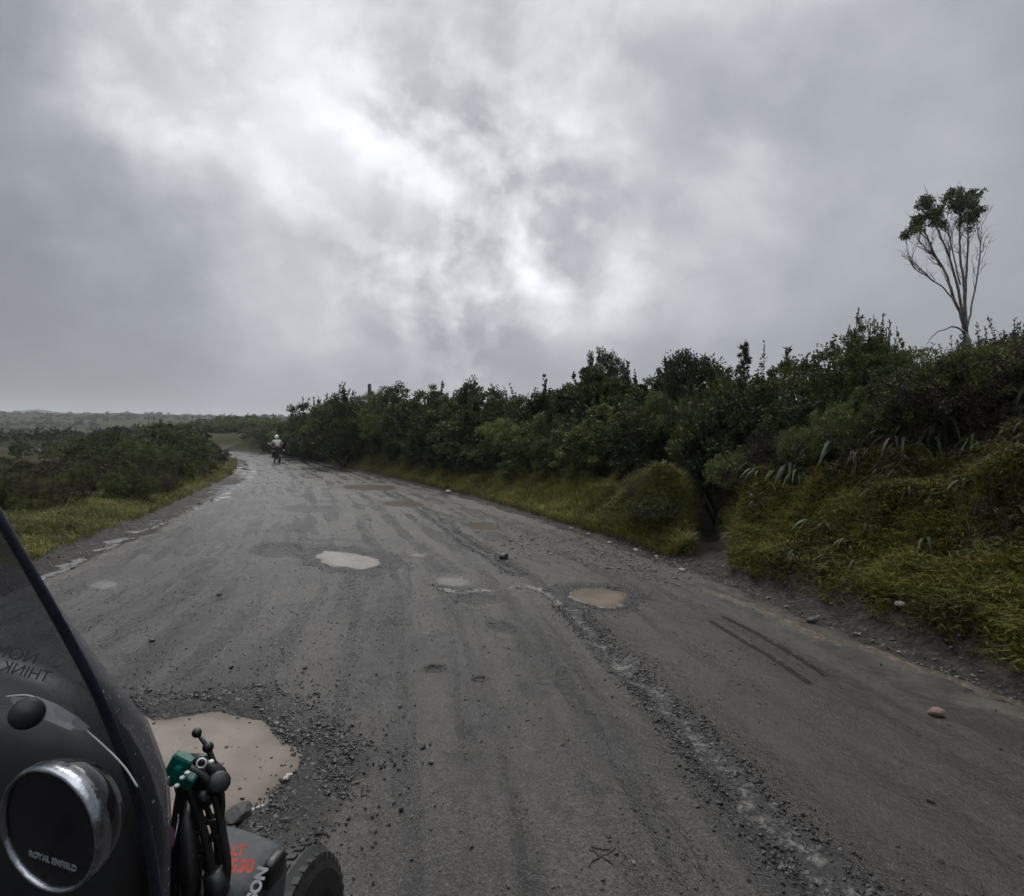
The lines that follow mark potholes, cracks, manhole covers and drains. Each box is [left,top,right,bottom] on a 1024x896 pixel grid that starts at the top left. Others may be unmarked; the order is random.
pothole [550,582,646,616]
pothole [373,499,436,508]
pothole [83,680,386,850]
pothole [83,577,129,592]
pothole [458,519,508,532]
pothole [331,483,413,493]
pothole [421,572,487,590]
pothole [424,663,447,673]
pothole [296,545,407,576]
